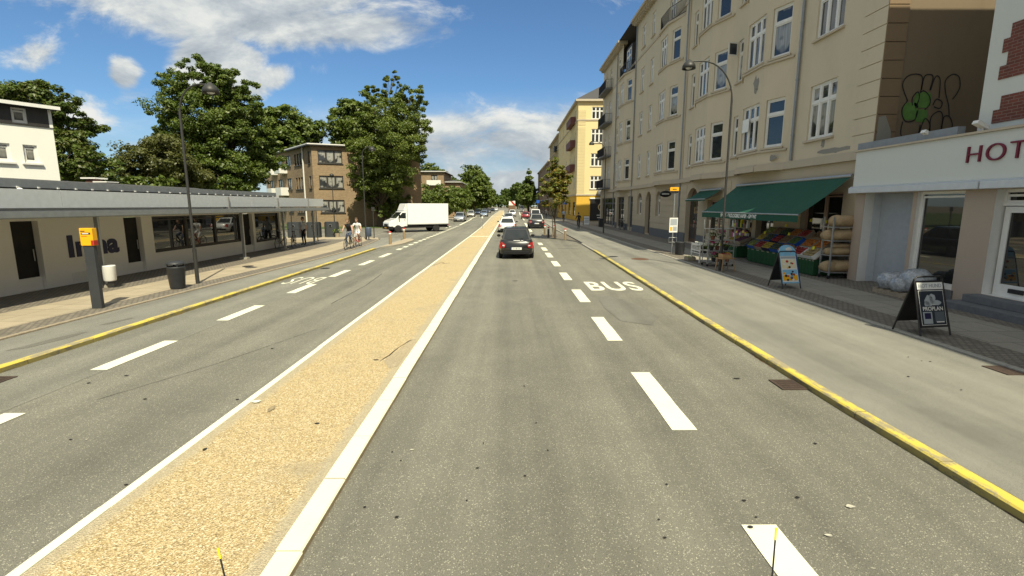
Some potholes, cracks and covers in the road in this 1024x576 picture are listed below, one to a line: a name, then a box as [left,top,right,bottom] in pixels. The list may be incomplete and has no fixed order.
drain grate [768,379,808,390]
drain grate [982,365,1024,375]
